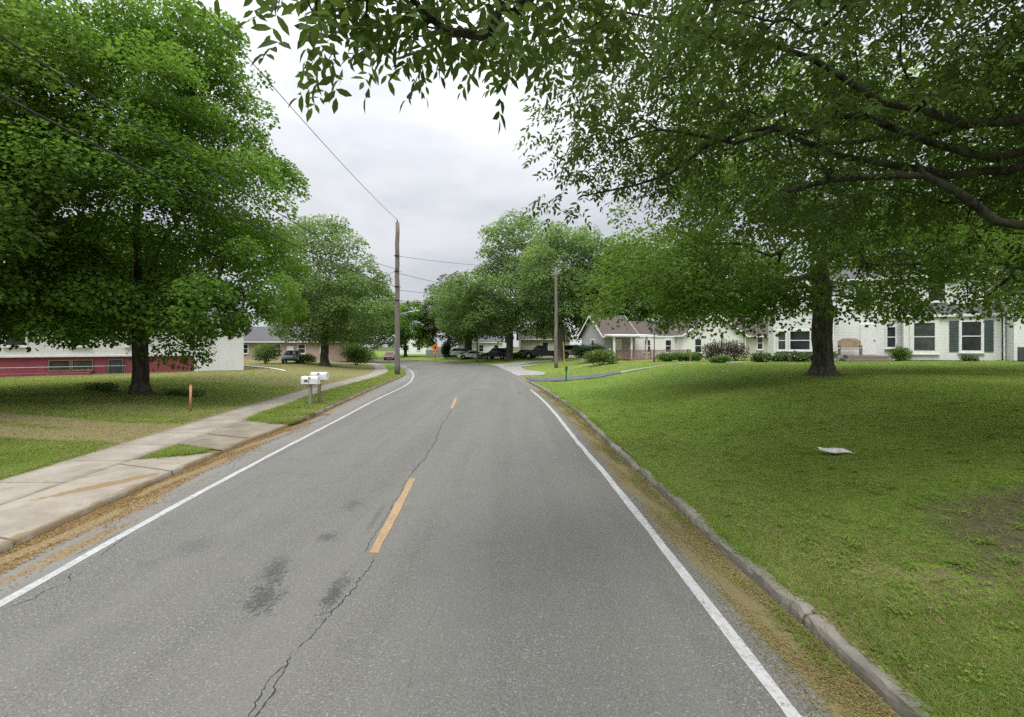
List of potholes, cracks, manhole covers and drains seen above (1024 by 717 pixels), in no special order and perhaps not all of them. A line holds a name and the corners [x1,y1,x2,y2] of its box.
crack [248,561,373,717]
crack [13,531,131,606]
